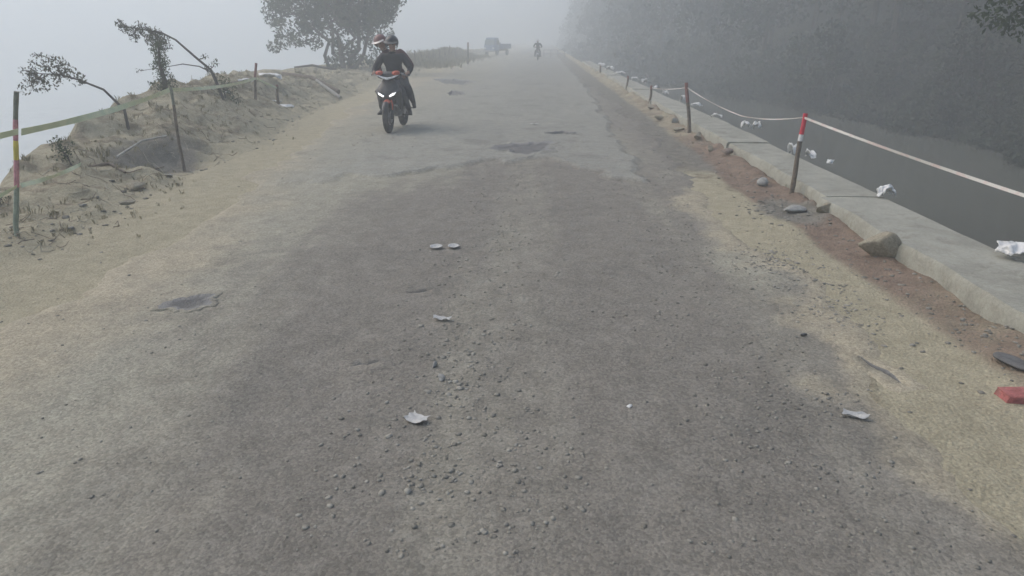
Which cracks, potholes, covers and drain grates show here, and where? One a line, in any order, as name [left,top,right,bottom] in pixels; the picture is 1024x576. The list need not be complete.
pothole [429,78,480,86]
pothole [148,292,223,313]
pothole [482,140,561,158]
pothole [445,89,467,97]
